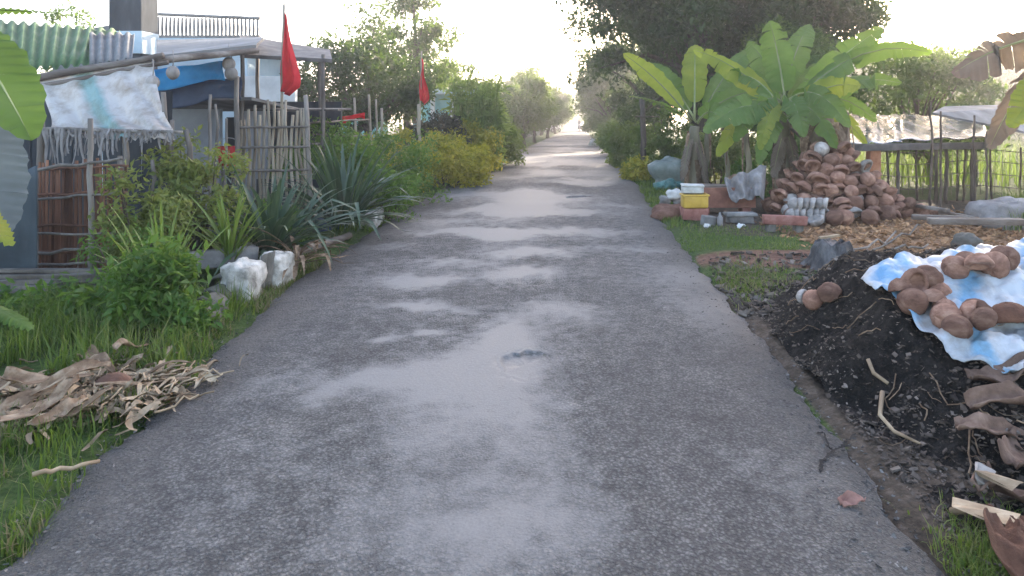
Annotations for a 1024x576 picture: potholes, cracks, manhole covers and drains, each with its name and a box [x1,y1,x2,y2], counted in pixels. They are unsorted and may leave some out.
crack [817,431,856,473]
pothole [495,348,561,383]
